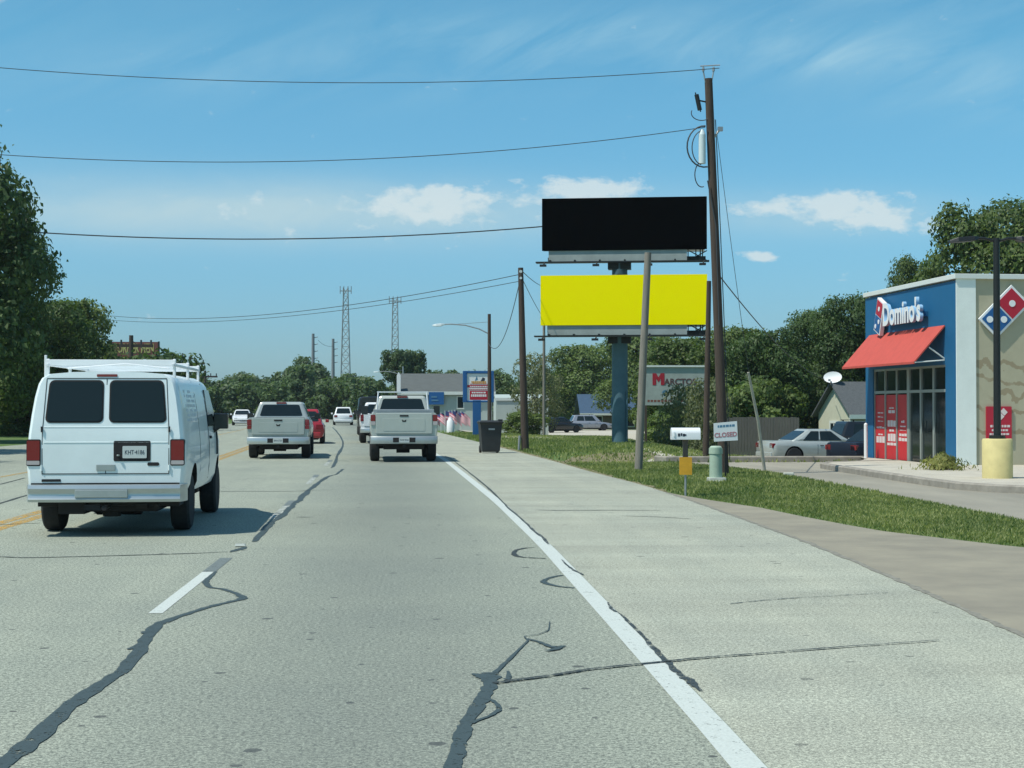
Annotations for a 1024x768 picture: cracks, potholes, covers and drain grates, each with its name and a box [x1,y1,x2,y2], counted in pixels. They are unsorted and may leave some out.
crack [446,456,703,692]
